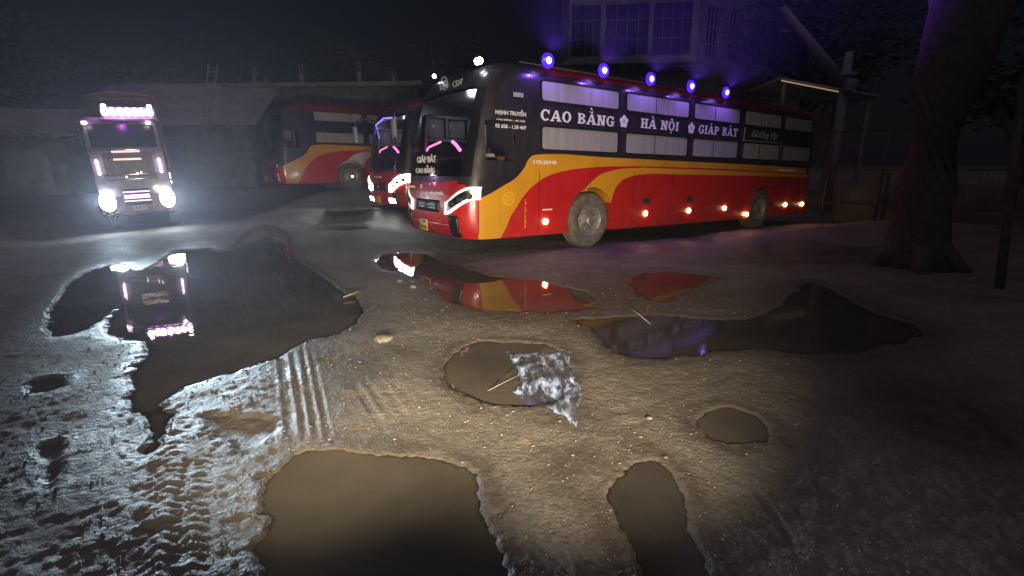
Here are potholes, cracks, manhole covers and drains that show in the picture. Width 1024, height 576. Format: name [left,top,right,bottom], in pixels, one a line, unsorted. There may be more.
pothole [569,280,932,362]
pothole [41,226,367,460]
pothole [23,375,71,394]
pothole [627,270,715,302]
pothole [371,252,603,314]
pothole [31,437,69,486]
pothole [689,404,774,447]
pothole [248,446,516,576]
pothole [601,455,717,576]
pothole [440,339,577,407]
